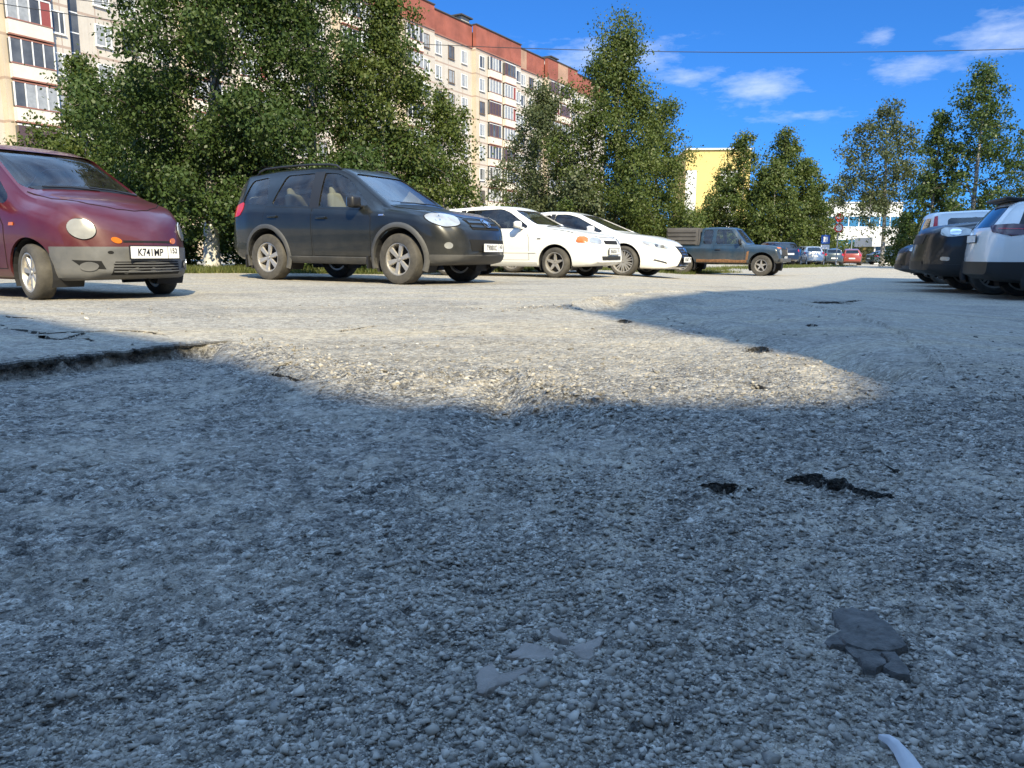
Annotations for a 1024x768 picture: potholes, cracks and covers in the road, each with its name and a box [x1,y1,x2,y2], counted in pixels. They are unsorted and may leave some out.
pothole [694,480,742,496]
crack [0,316,165,341]
pothole [777,472,899,500]
pothole [0,338,638,478]
crack [271,363,311,382]
